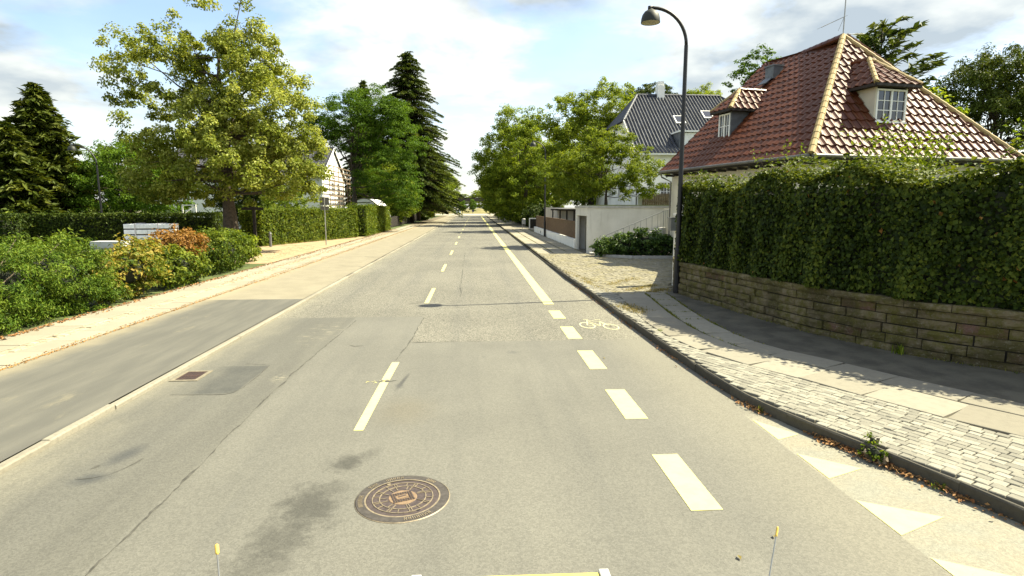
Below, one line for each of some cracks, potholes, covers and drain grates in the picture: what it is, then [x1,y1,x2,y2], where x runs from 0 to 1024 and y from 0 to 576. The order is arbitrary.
drain grate [169,370,213,382]
manhole cover [354,476,450,524]
